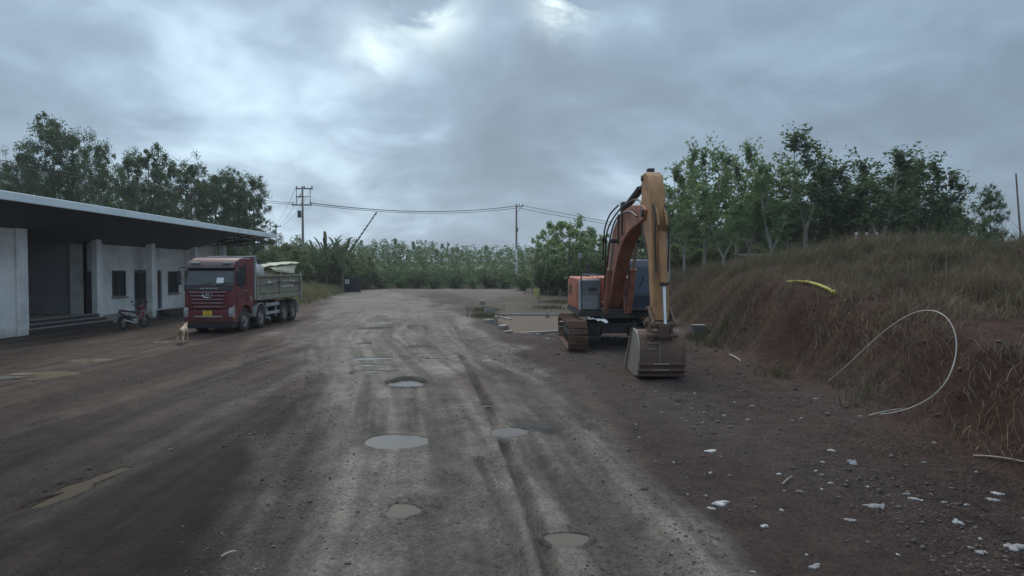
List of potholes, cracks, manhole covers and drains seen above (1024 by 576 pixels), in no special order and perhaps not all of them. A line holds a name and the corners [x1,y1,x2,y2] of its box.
pothole [353,431,441,453]
pothole [535,528,597,549]
pothole [377,375,434,389]
pothole [485,424,535,439]
pothole [380,500,428,520]
pothole [5,460,147,520]
